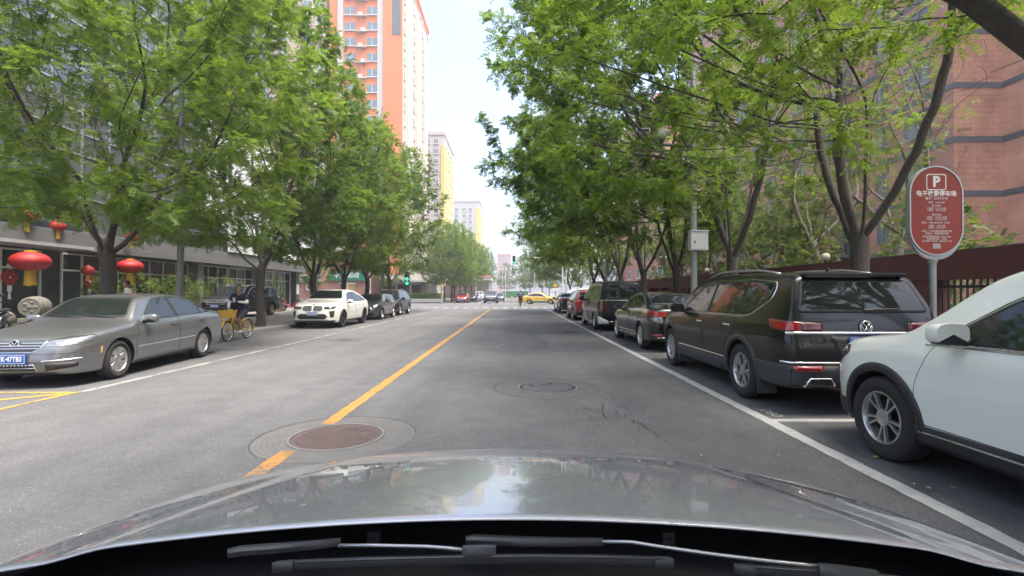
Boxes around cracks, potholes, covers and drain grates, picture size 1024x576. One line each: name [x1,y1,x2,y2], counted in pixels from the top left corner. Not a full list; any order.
manhole cover [248,416,416,464]
manhole cover [494,378,601,399]
crack [583,392,660,438]
